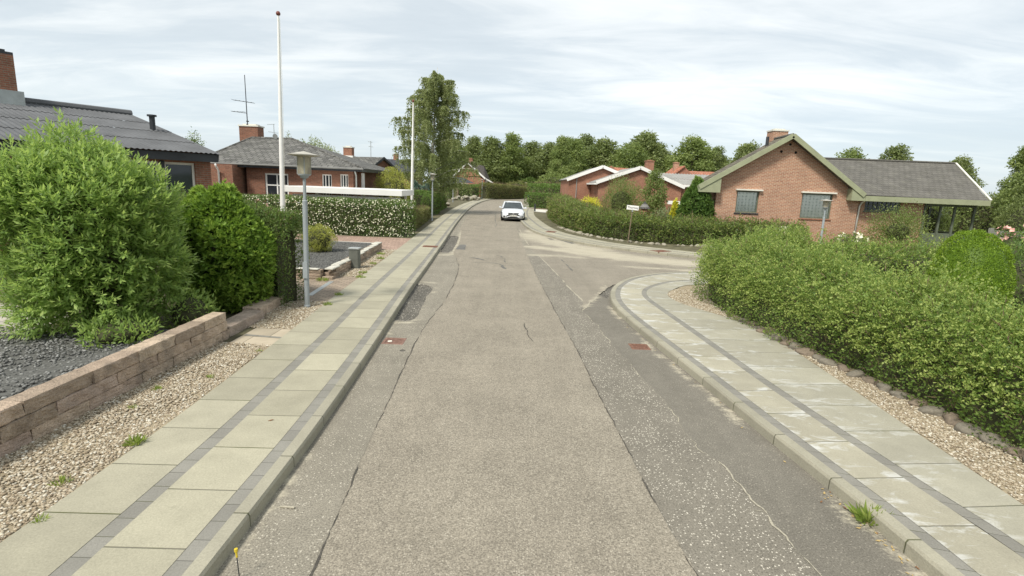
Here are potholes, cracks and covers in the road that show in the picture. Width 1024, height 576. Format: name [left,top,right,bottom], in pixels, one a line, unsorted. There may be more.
crack [519,229,822,576]
crack [309,255,506,576]
